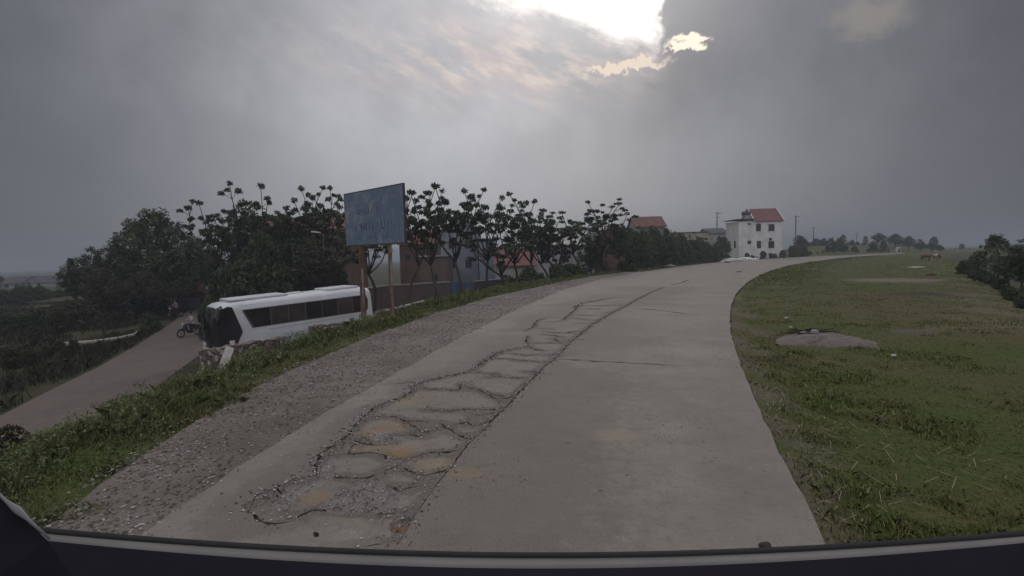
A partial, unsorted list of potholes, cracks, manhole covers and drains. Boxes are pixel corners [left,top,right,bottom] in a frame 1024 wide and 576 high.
crack [224,287,777,549]
pothole [320,482,402,515]
pothole [388,516,414,534]
pothole [369,429,409,441]
